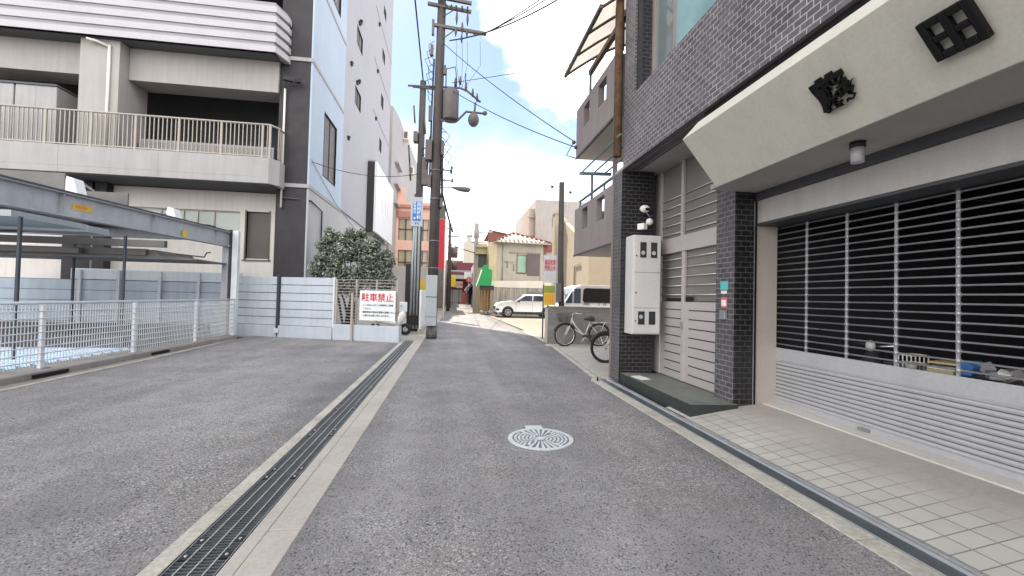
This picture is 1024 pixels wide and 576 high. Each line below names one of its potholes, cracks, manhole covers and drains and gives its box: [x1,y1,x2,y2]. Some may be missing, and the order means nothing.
drain grate [188,472,302,550]
drain grate [355,377,383,390]
manhole cover [508,425,573,451]
drain grate [336,389,372,407]
drain grate [310,407,357,433]
drain grate [160,546,239,576]
drain grate [368,367,391,377]
drain grate [267,432,336,474]
